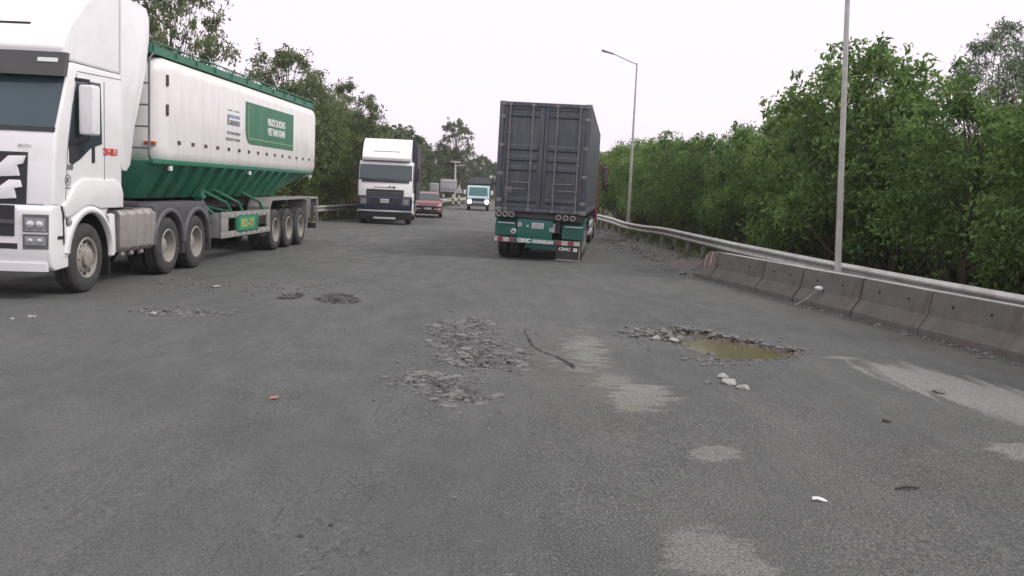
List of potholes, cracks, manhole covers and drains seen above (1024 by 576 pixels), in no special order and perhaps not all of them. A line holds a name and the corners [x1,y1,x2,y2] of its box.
pothole [642,327,804,361]
pothole [140,309,238,317]
pothole [311,293,363,304]
crack [376,317,575,426]
pothole [274,292,305,300]
